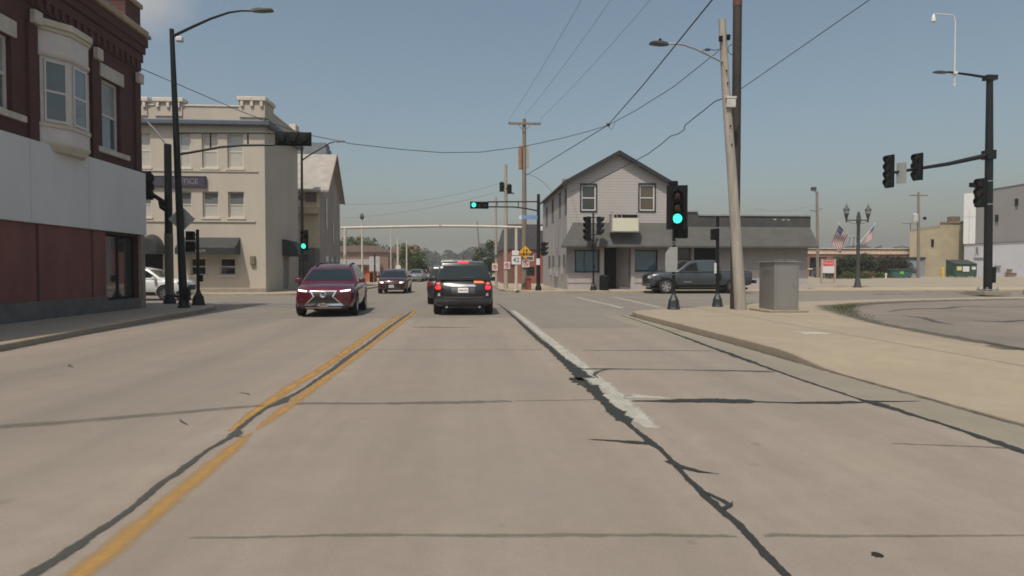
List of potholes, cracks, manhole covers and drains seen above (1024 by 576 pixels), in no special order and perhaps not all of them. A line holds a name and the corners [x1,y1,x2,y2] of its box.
crack [497,303,1024,576]
pothole [569,377,593,387]
